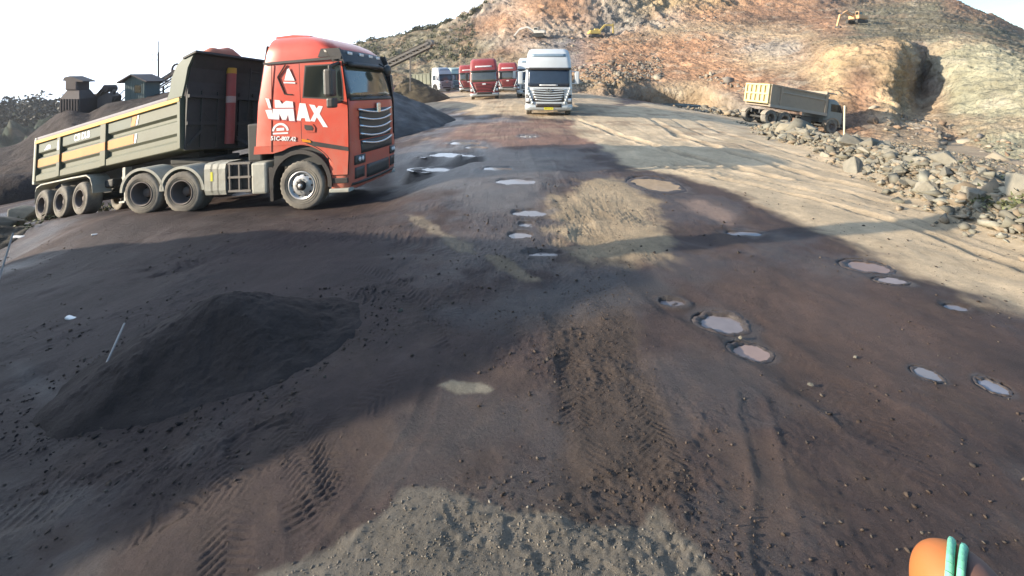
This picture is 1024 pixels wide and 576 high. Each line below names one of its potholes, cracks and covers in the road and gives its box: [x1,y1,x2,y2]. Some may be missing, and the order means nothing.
pothole [872,277,911,285]
pothole [691,310,752,337]
pothole [910,366,947,384]
pothole [972,376,1014,397]
pothole [838,259,897,275]
pothole [726,341,776,364]
pothole [626,176,687,195]
